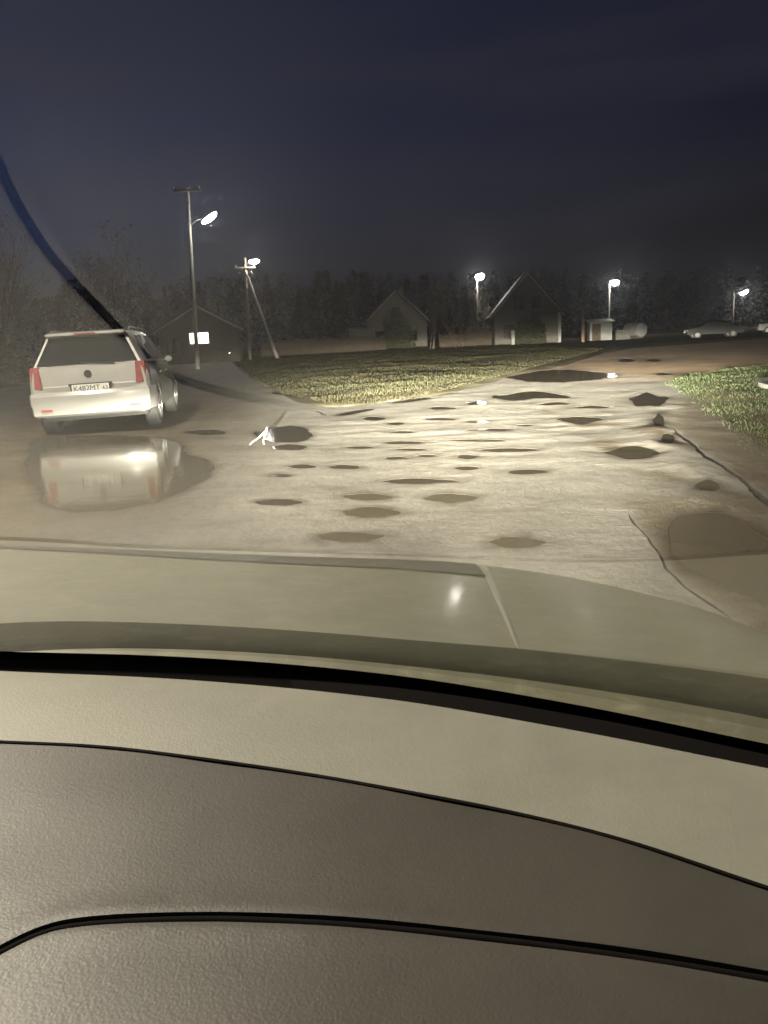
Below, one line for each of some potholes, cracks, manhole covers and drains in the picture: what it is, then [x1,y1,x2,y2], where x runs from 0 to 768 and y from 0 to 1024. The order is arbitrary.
pothole [489,536,547,548]
pothole [25,435,215,510]
pothole [599,446,659,459]
crack [628,429,768,621]
pothole [695,479,721,491]
pothole [253,425,313,442]
pothole [556,416,604,425]
pothole [343,506,401,518]
pothole [320,532,385,542]
pothole [629,392,669,407]
pothole [492,391,571,401]
pothole [423,493,477,503]
